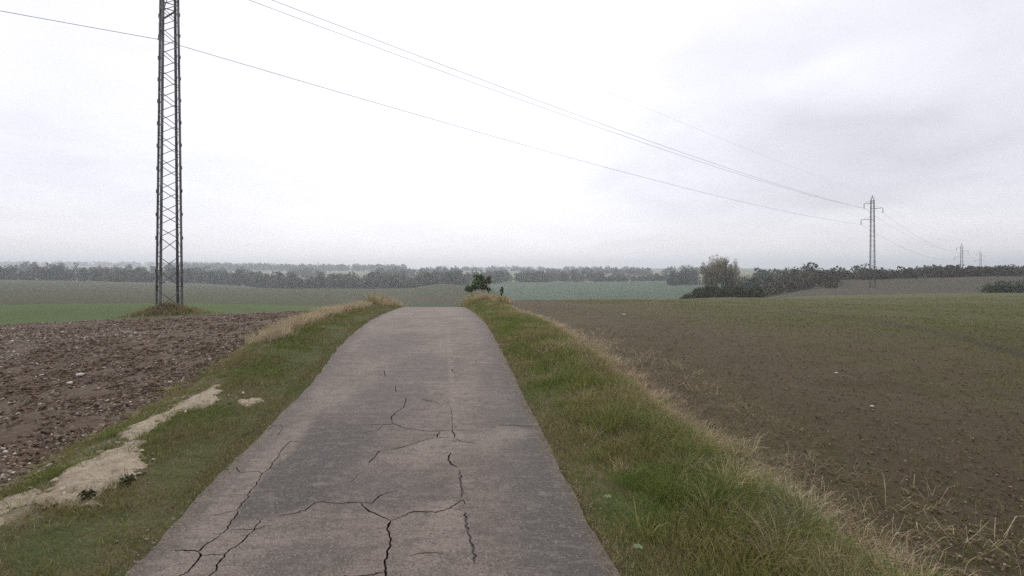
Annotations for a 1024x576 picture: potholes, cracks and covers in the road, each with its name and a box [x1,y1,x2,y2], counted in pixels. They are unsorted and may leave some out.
crack [163,424,299,576]
crack [280,490,465,576]
crack [351,370,475,482]
